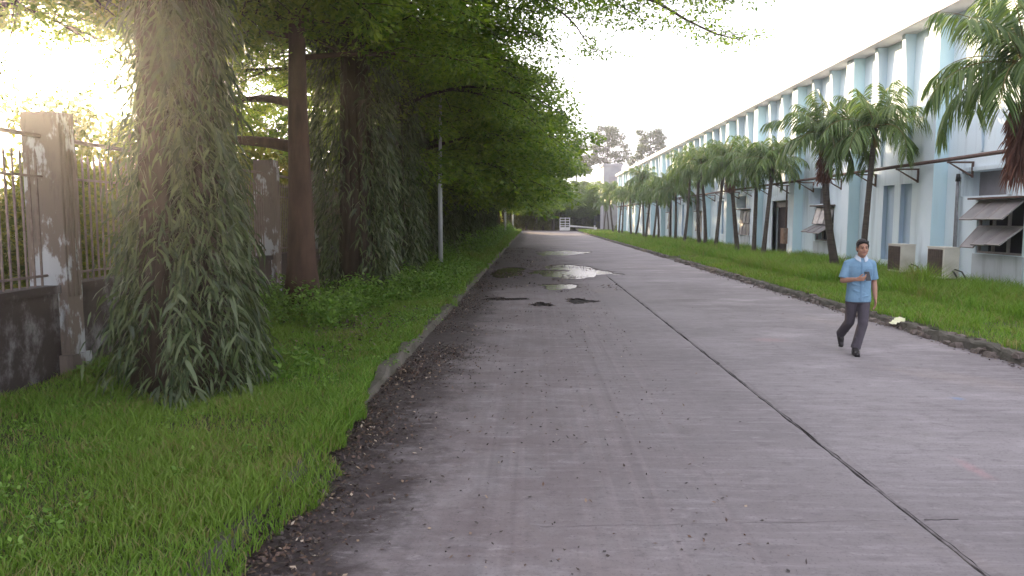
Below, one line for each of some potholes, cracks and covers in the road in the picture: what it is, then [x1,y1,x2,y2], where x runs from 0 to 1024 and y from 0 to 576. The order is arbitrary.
pothole [522,264,630,280]
pothole [530,283,589,291]
pothole [556,297,608,305]
